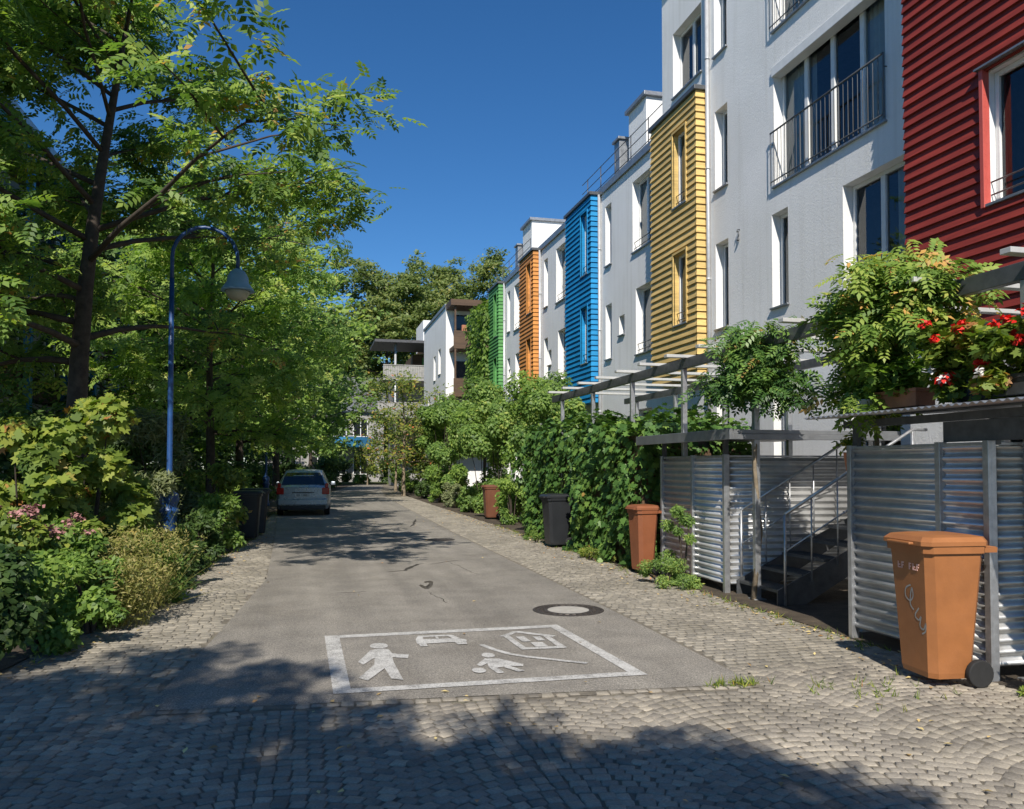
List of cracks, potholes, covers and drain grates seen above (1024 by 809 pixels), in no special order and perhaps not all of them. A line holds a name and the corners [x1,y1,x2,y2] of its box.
crack [390,560,477,574]
manhole cover [533,604,604,616]
